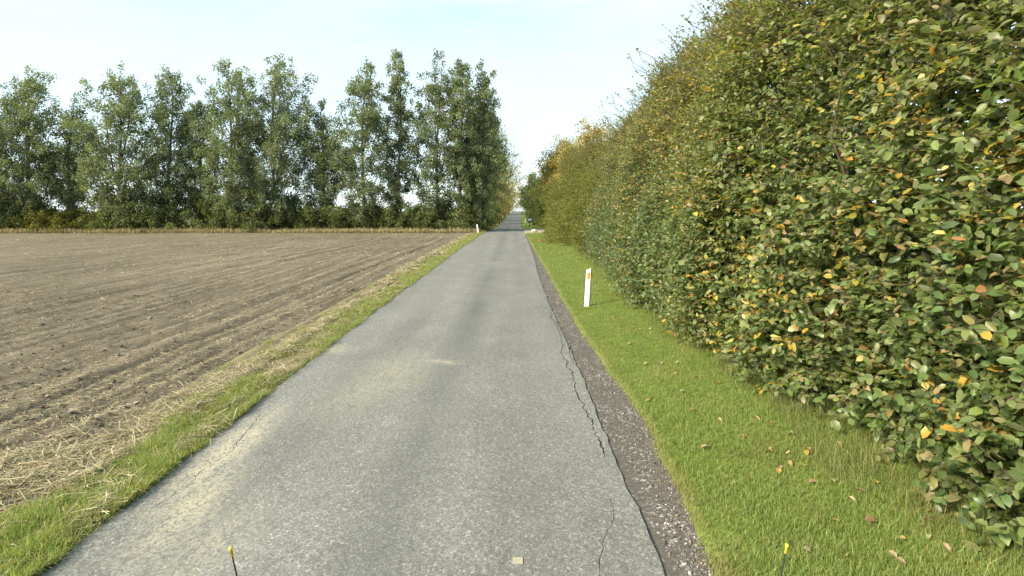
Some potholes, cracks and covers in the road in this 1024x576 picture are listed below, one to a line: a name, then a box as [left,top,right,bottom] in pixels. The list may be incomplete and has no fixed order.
crack [547,300,607,463]
crack [599,499,614,576]
crack [150,409,264,511]
